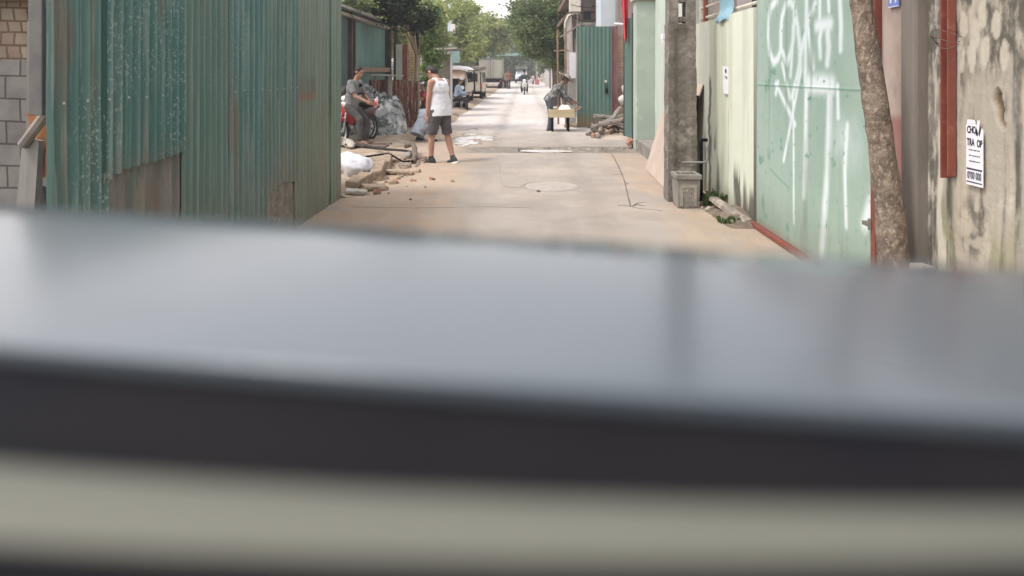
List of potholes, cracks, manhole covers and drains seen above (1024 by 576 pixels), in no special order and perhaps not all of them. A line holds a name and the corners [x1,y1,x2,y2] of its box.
crack [610,153,662,211]
manhole cover [520,181,582,192]
